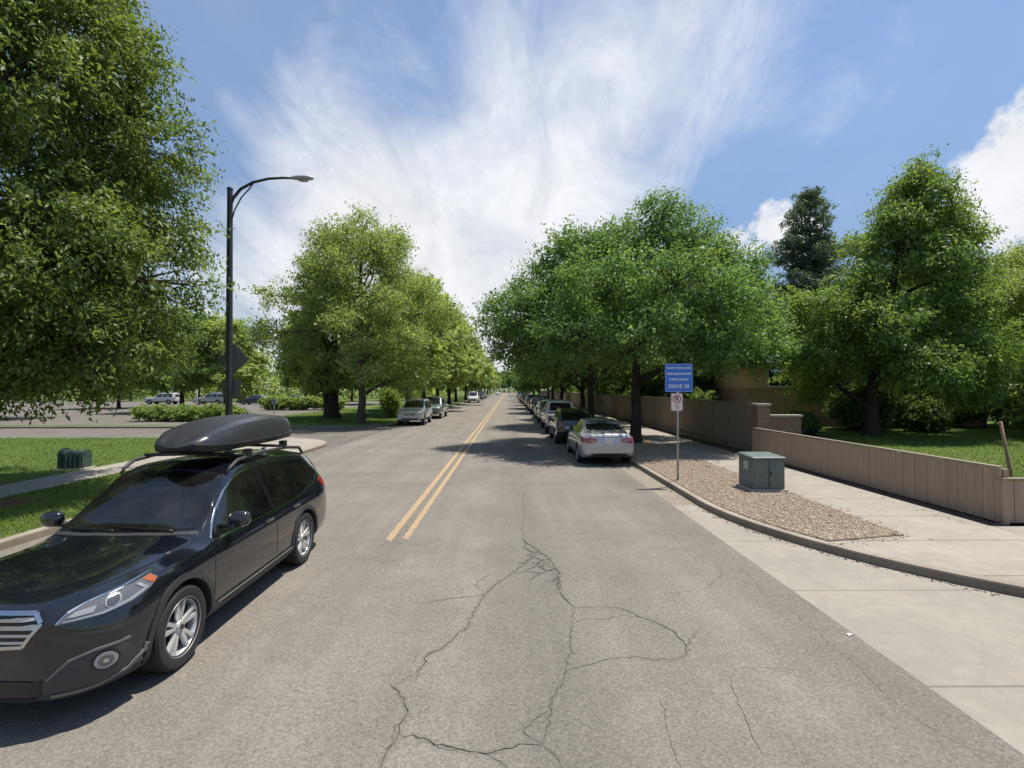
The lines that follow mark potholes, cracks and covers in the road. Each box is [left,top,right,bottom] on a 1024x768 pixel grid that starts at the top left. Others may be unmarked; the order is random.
crack [380,508,694,768]
crack [667,535,995,768]
